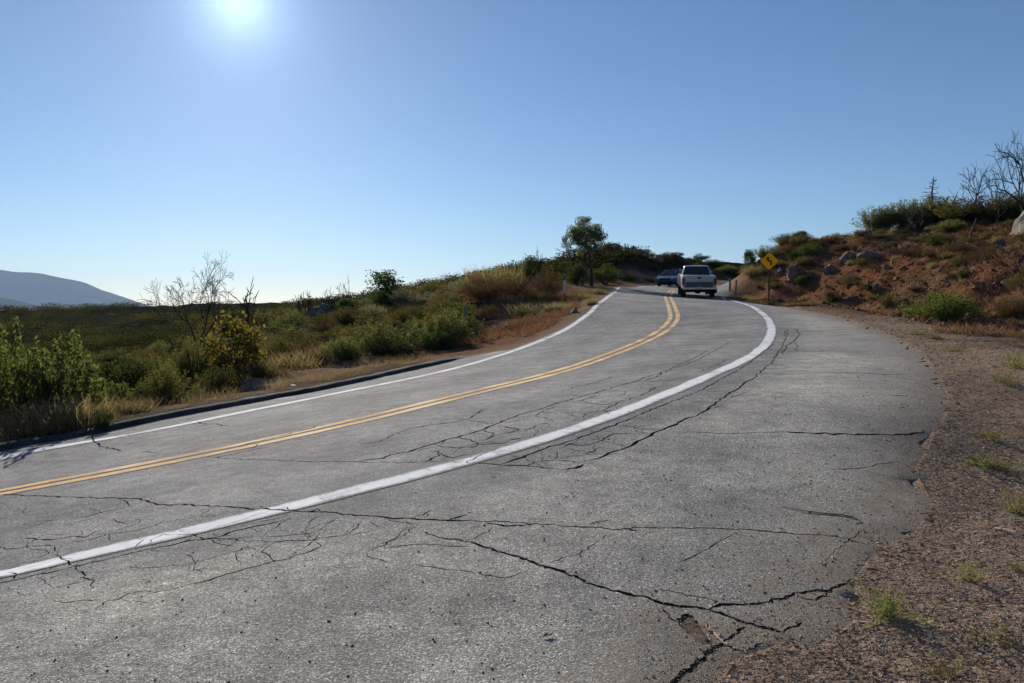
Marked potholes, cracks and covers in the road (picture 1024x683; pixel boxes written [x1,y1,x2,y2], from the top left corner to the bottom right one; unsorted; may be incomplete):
crack [0,329,924,683]
pothole [677,613,709,645]
